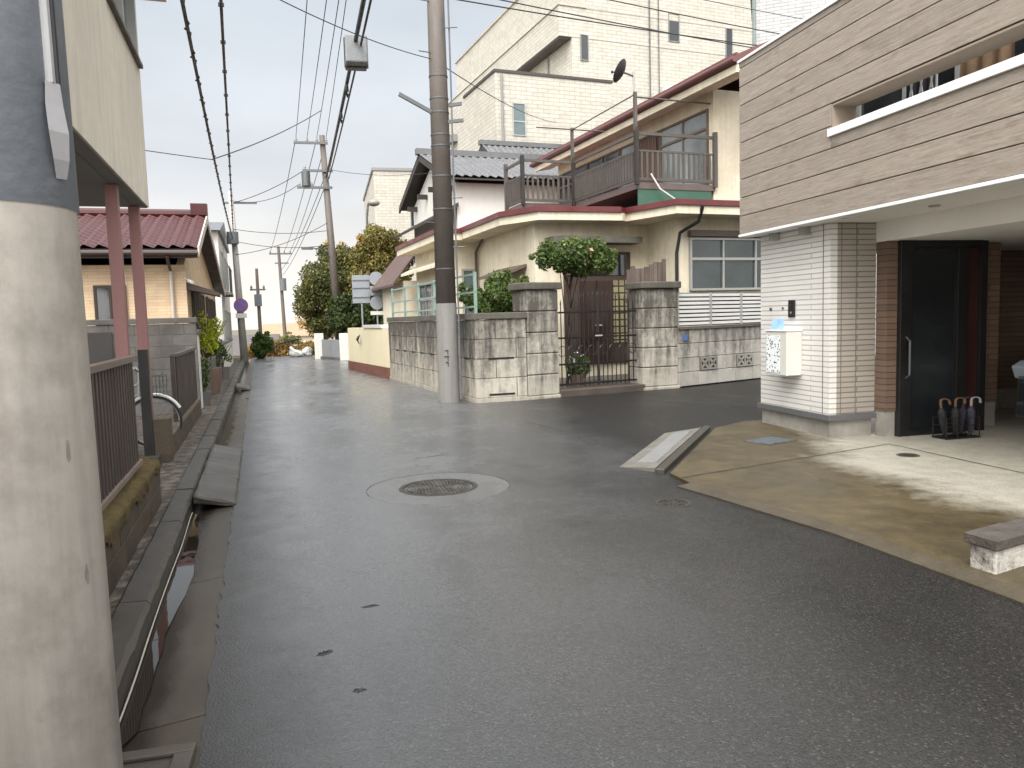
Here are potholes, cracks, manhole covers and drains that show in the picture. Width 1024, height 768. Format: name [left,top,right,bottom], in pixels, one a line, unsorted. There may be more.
manhole cover [366,473,510,504]
manhole cover [654,498,692,507]
